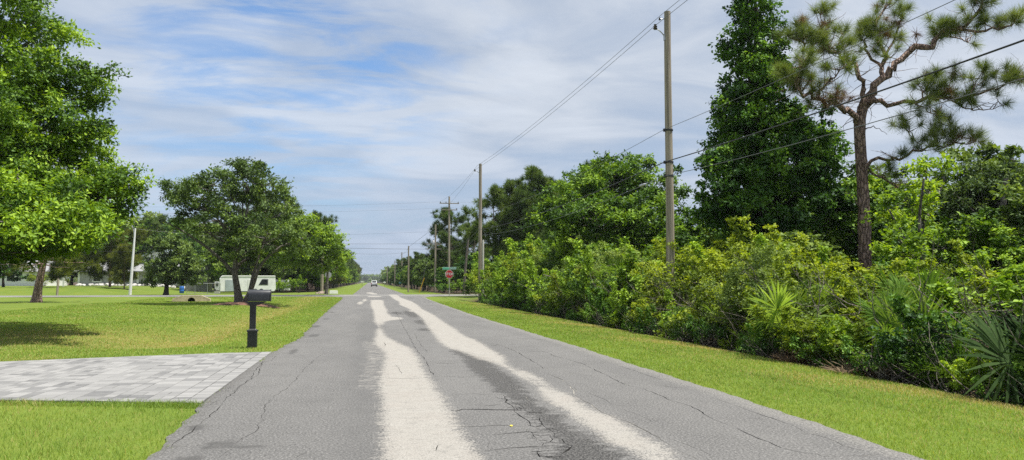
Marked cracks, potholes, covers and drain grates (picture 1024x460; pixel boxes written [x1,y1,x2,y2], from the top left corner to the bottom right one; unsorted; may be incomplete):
crack [164,357,314,457]
crack [494,339,863,460]
crack [450,394,571,459]
